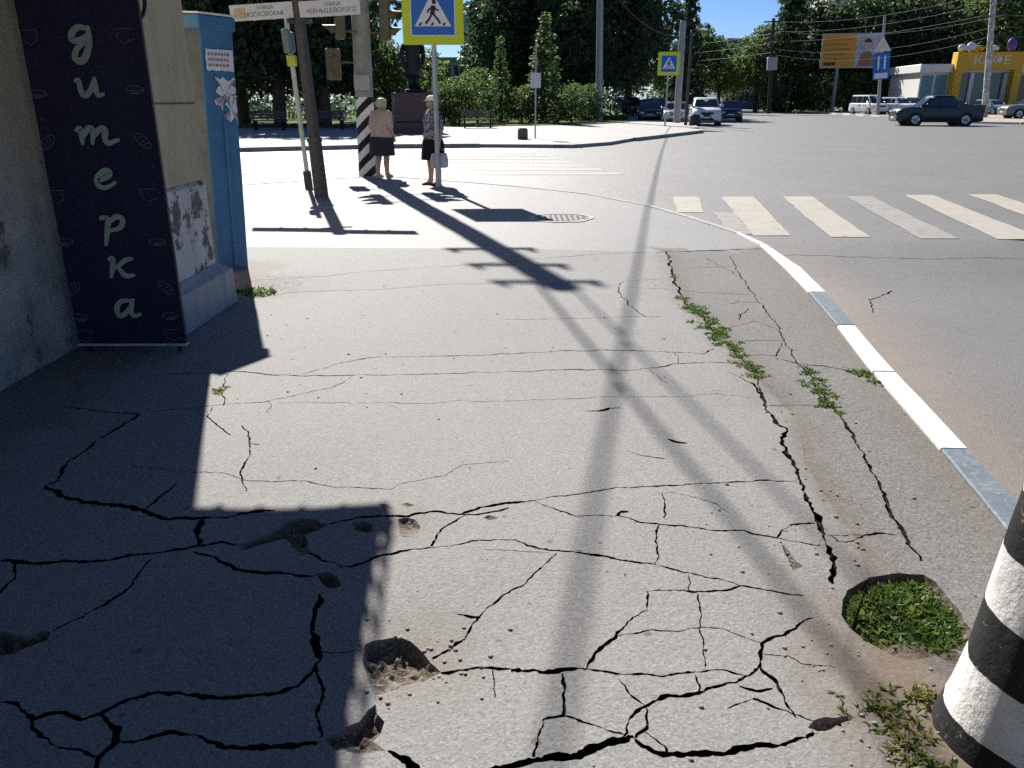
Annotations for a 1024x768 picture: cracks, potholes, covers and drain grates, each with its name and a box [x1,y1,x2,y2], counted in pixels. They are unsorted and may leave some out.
manhole cover [528,213,595,223]
pothole [322,705,385,756]
pothole [398,517,421,538]
pothole [315,571,342,590]
pothole [841,573,972,664]
pothole [232,518,327,557]
pothole [363,637,440,701]
crack [0,256,923,768]
